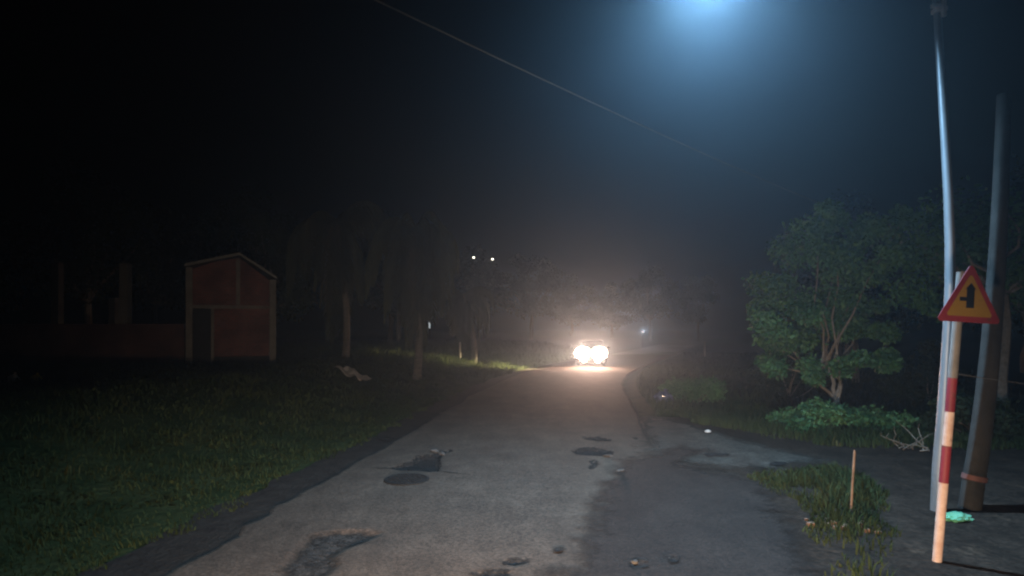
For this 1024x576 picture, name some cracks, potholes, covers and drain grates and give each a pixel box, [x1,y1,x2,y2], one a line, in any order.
pothole [392,449,452,472]
pothole [282,532,372,576]
pothole [571,447,613,456]
pothole [502,557,529,565]
